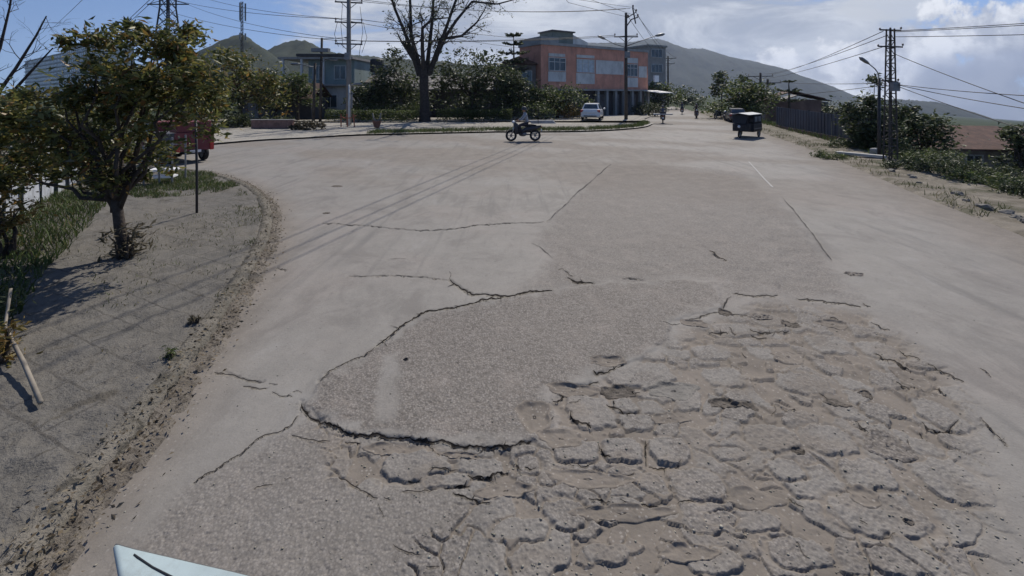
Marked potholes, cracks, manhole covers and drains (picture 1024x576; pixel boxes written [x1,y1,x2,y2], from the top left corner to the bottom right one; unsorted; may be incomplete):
crack [194,372,535,516]
pothole [600,384,636,400]
crack [551,365,640,467]
crack [877,350,991,396]
crack [627,441,681,476]
crack [355,243,593,346]
crack [798,298,890,330]
crack [589,498,658,508]
crack [896,419,959,461]
crack [663,293,789,358]
